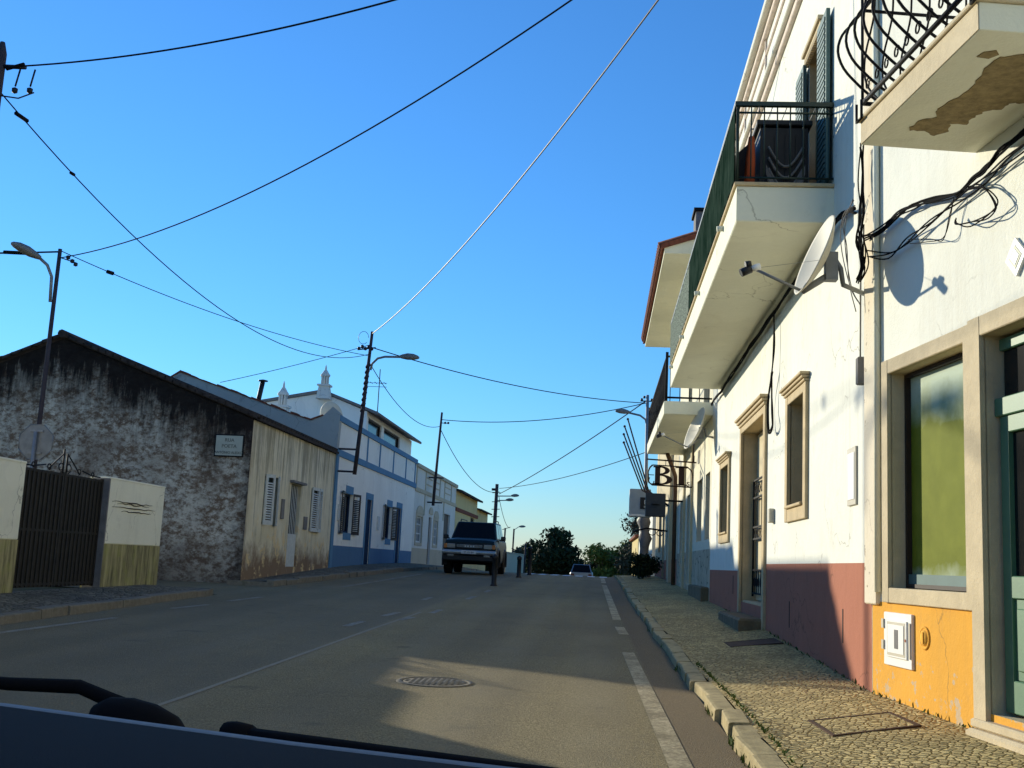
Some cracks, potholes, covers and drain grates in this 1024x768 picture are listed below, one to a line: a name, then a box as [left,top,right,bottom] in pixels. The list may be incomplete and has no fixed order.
utility cover [807,712,922,737]
manhole cover [396,676,474,688]
utility cover [724,638,784,647]
